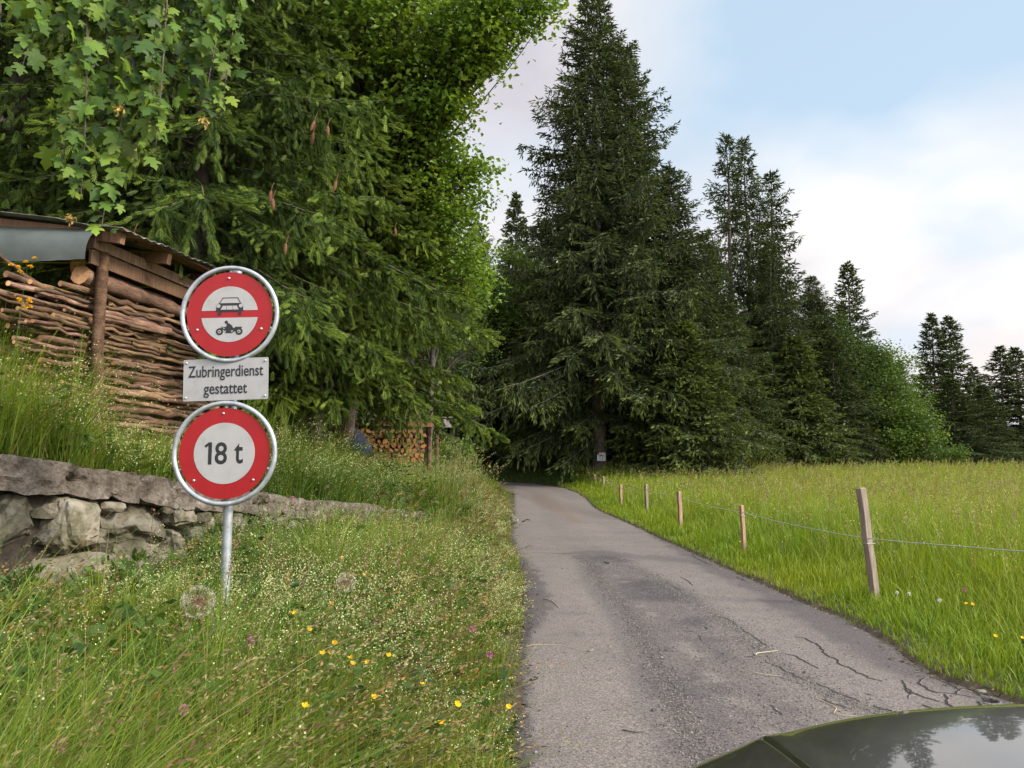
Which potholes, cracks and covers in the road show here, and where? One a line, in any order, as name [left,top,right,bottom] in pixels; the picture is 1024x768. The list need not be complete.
crack [684,616,992,712]
